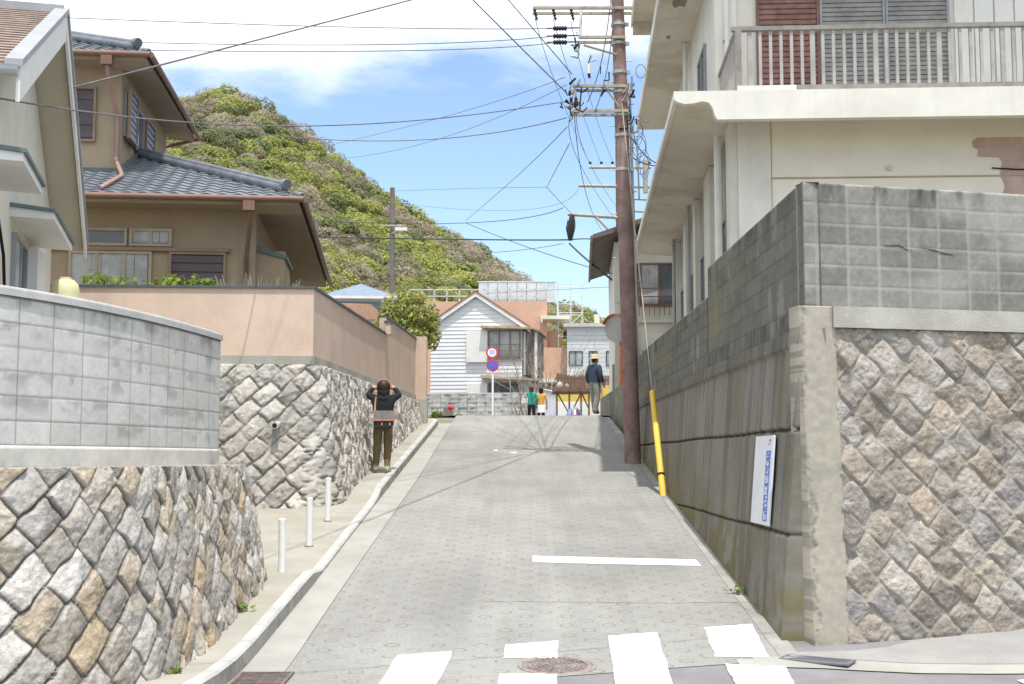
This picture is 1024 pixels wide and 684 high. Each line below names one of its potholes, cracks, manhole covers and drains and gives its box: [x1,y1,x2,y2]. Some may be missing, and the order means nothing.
manhole cover [518,655,596,675]
drain grate [778,654,856,666]
drain grate [228,671,295,684]
